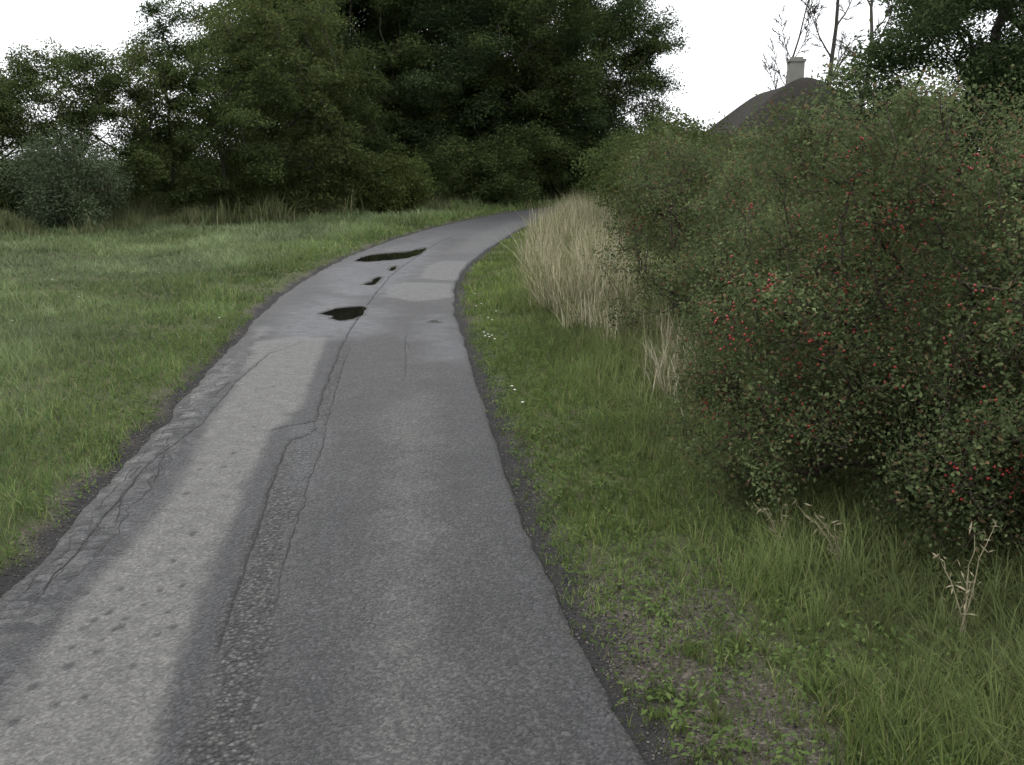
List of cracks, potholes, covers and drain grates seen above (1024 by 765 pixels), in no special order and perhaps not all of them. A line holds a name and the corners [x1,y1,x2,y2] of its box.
pothole [353,247,429,262]
crack [0,343,300,628]
pothole [316,305,370,321]
crack [274,356,347,609]
